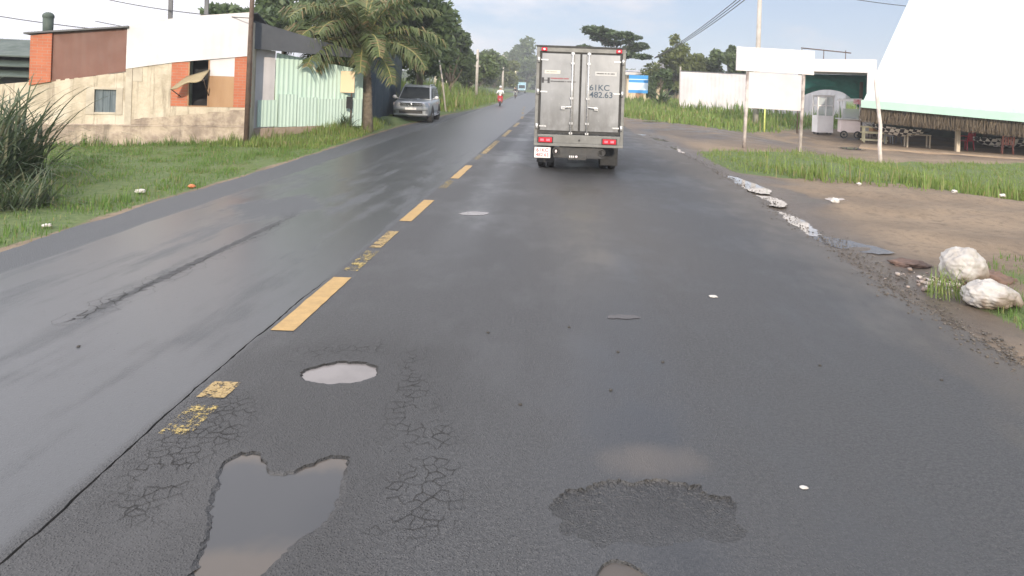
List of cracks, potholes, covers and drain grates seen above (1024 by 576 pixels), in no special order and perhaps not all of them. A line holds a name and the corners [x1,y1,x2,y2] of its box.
pothole [187,451,350,576]
pothole [300,361,378,384]
crack [342,340,482,550]
crack [0,211,396,565]
pothole [548,478,749,548]
pothole [595,559,649,576]
